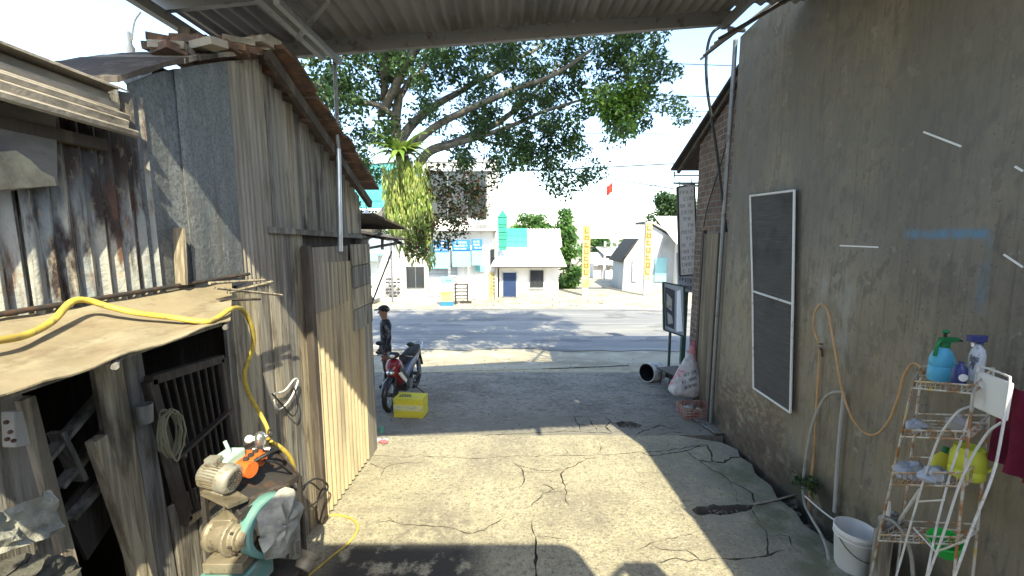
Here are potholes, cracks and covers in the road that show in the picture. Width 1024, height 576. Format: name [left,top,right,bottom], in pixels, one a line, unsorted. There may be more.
crack [372,416,795,563]
pothole [692,504,753,516]
